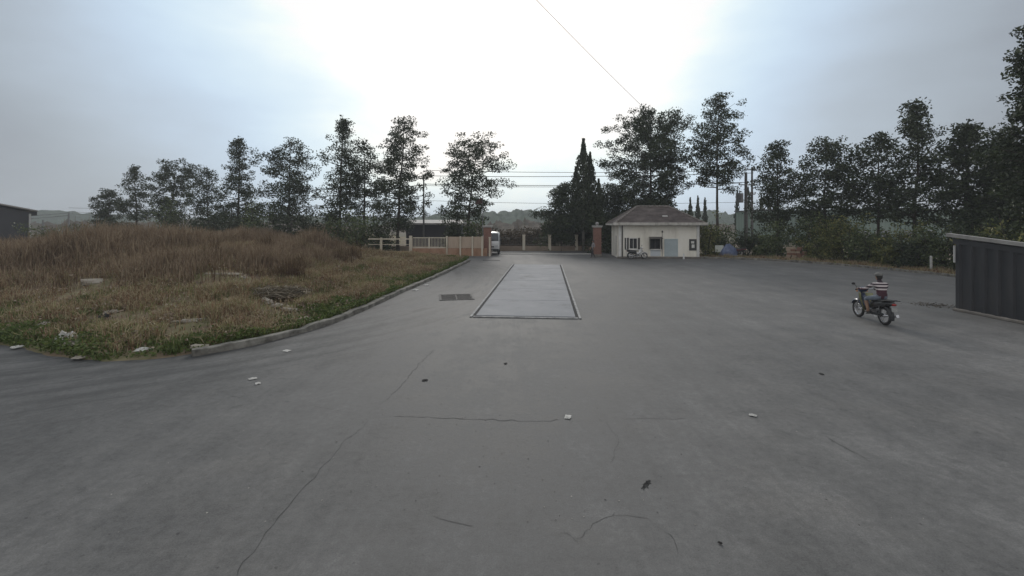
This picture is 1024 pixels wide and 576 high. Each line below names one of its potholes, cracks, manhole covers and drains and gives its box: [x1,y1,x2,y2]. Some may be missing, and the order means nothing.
crack [233,360,558,575]
